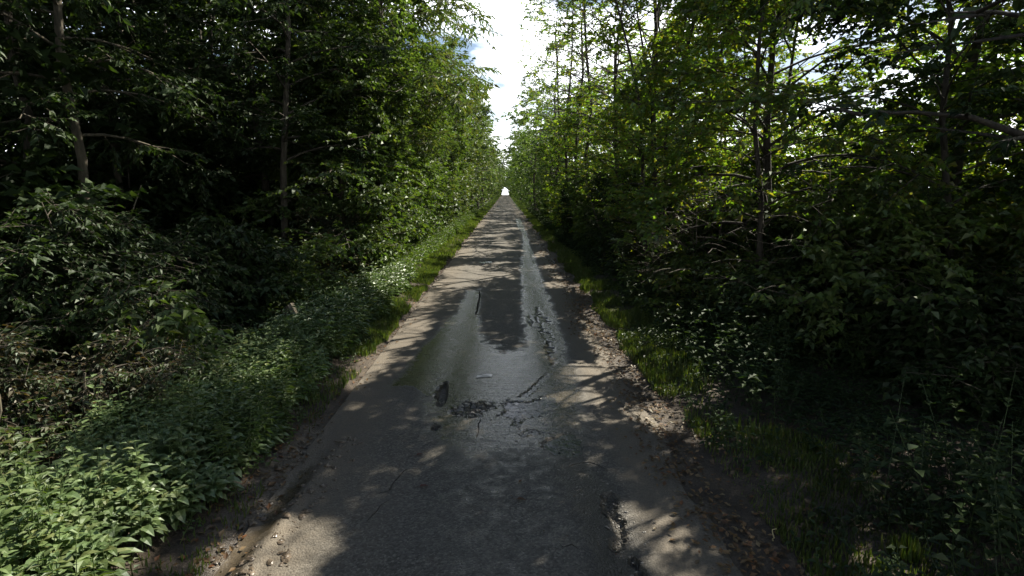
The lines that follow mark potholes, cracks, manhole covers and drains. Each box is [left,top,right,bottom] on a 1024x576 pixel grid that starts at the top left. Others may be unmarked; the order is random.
pothole [433,380,449,408]
crack [526,304,558,367]
crack [366,468,408,522]
